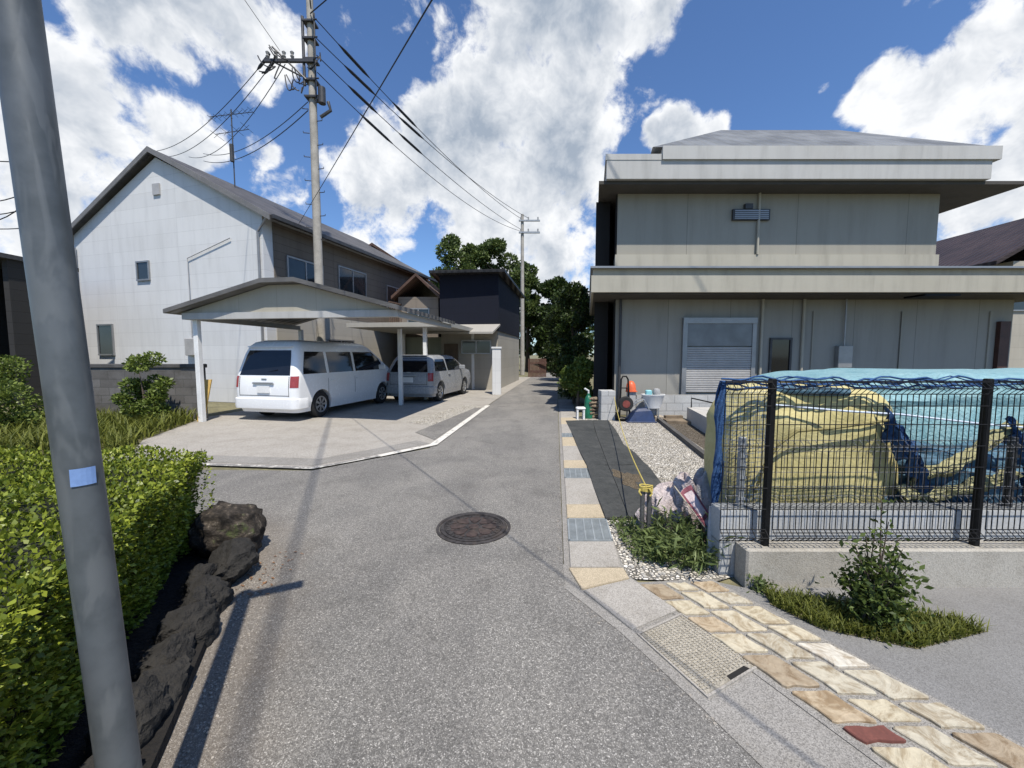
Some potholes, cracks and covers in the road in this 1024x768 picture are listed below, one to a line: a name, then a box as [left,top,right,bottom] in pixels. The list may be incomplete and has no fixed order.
manhole cover [436,512,511,545]
